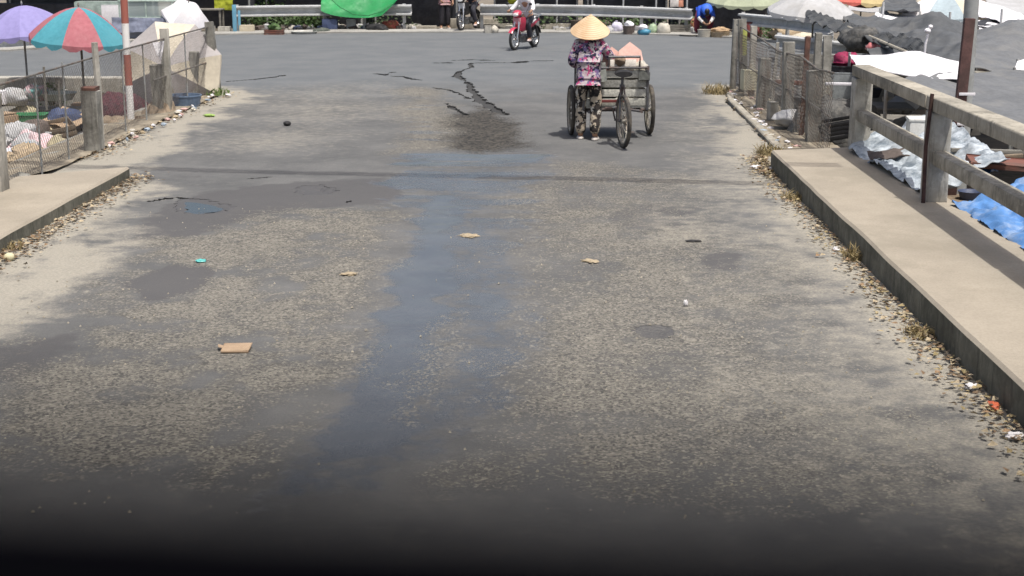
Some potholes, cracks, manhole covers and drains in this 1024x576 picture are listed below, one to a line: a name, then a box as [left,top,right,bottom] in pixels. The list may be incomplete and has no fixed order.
crack [436,59,554,116]
crack [378,72,419,80]
pothole [173,198,237,215]
